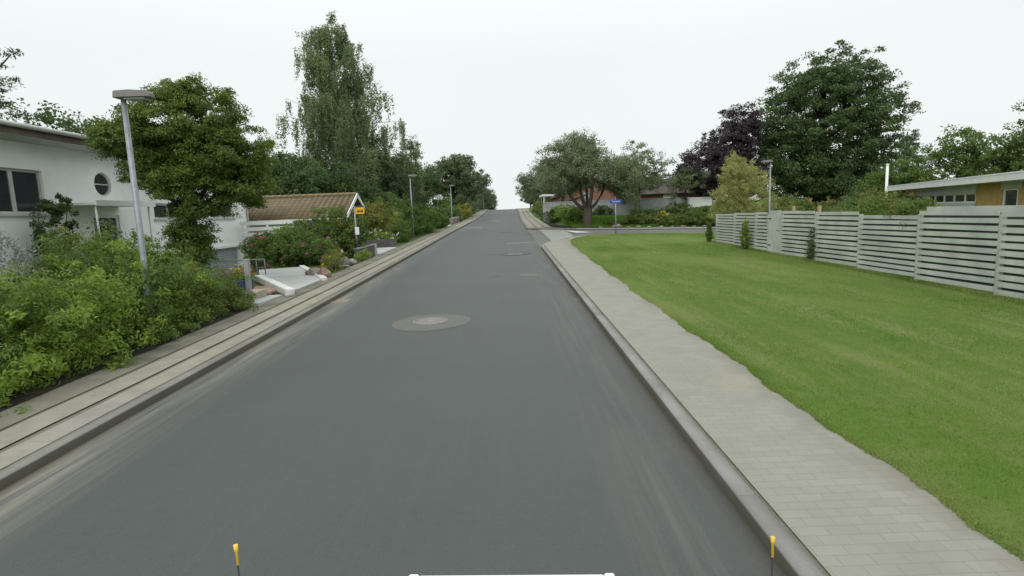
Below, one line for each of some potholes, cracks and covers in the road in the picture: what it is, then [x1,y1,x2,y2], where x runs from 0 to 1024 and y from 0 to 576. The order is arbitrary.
manhole cover [412,317,448,325]
